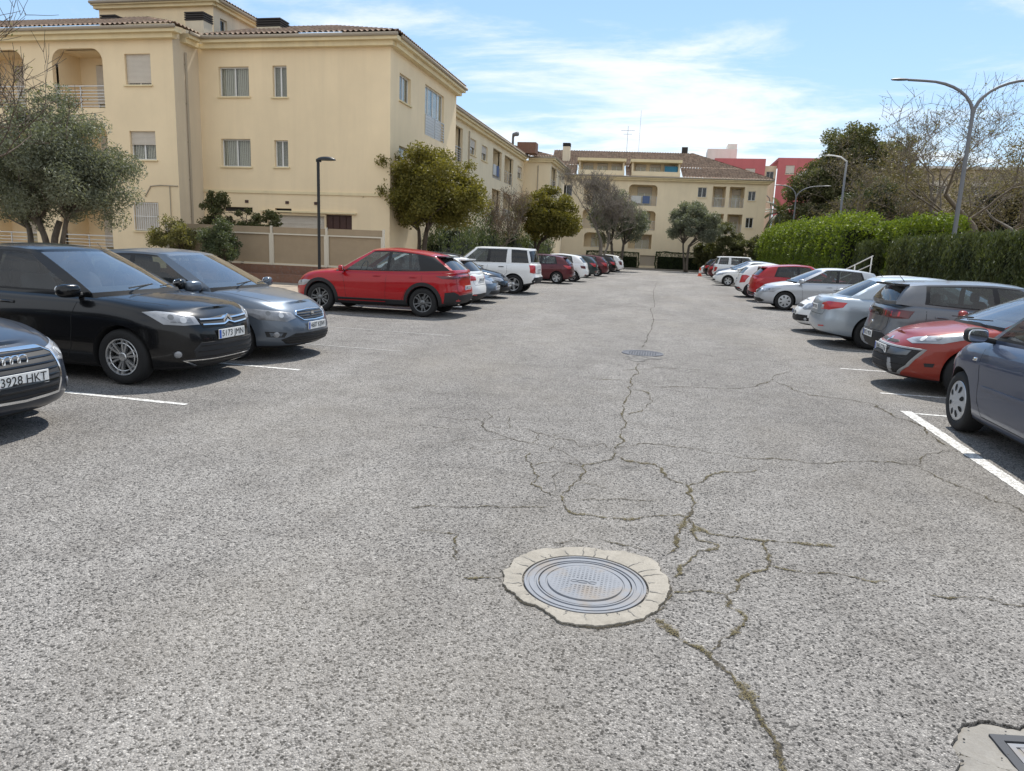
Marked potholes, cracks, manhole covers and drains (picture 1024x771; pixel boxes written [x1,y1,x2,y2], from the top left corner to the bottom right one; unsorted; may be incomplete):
crack [411,363,1024,771]
manhole cover [502,547,673,629]
